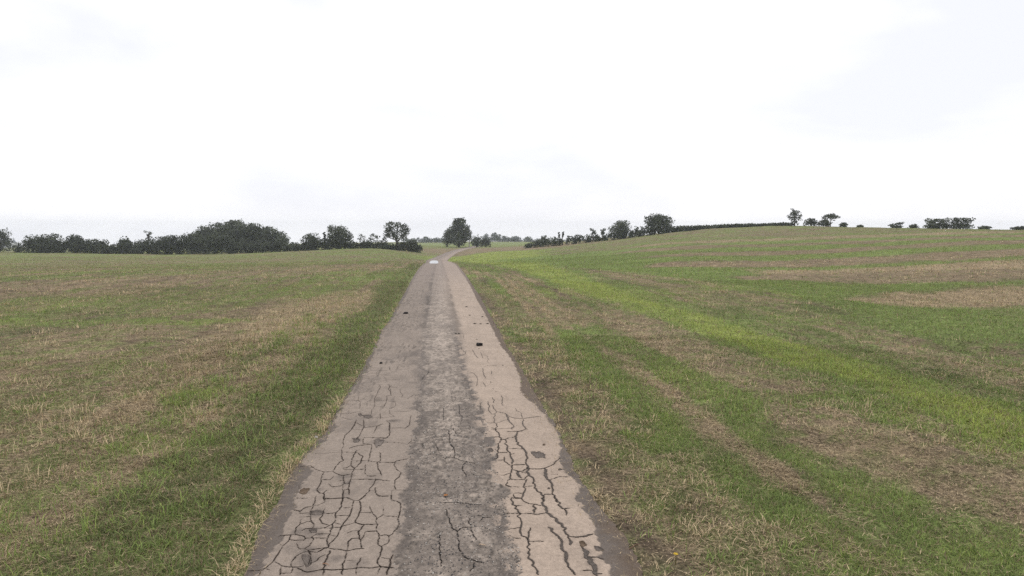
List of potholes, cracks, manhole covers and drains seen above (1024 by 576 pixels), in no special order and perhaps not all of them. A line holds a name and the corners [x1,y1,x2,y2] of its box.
crack [458,336,603,576]
crack [247,379,411,574]
